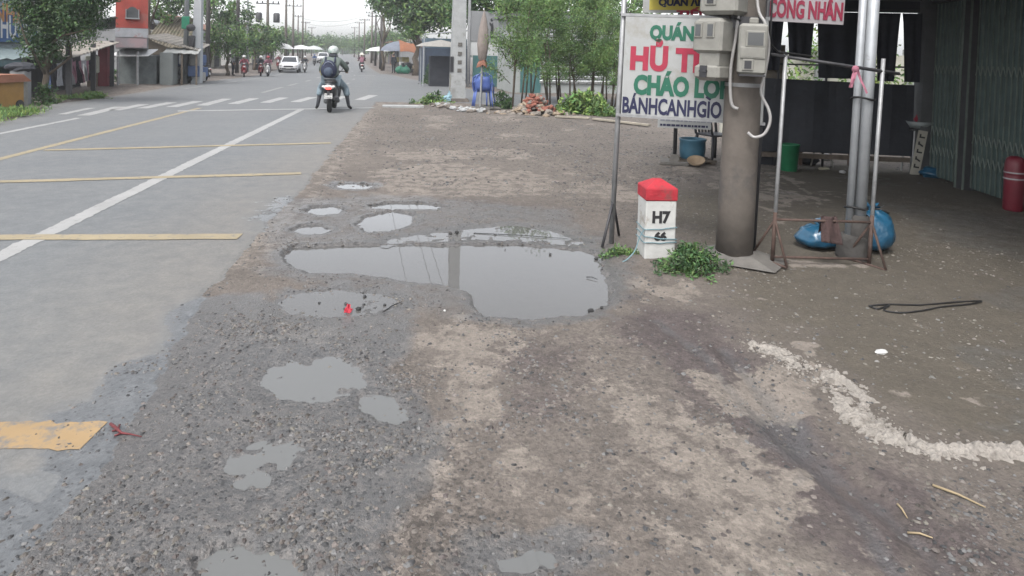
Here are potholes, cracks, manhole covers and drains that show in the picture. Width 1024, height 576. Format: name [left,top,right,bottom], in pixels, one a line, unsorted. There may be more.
pothole [375,221,594,248]
pothole [350,385,430,429]
pothole [245,346,379,411]
pothole [276,240,619,321]
pothole [194,418,329,519]
pothole [364,200,449,210]
pothole [469,537,589,576]
pothole [300,203,350,216]
pothole [352,209,423,232]
pothole [180,524,343,576]
